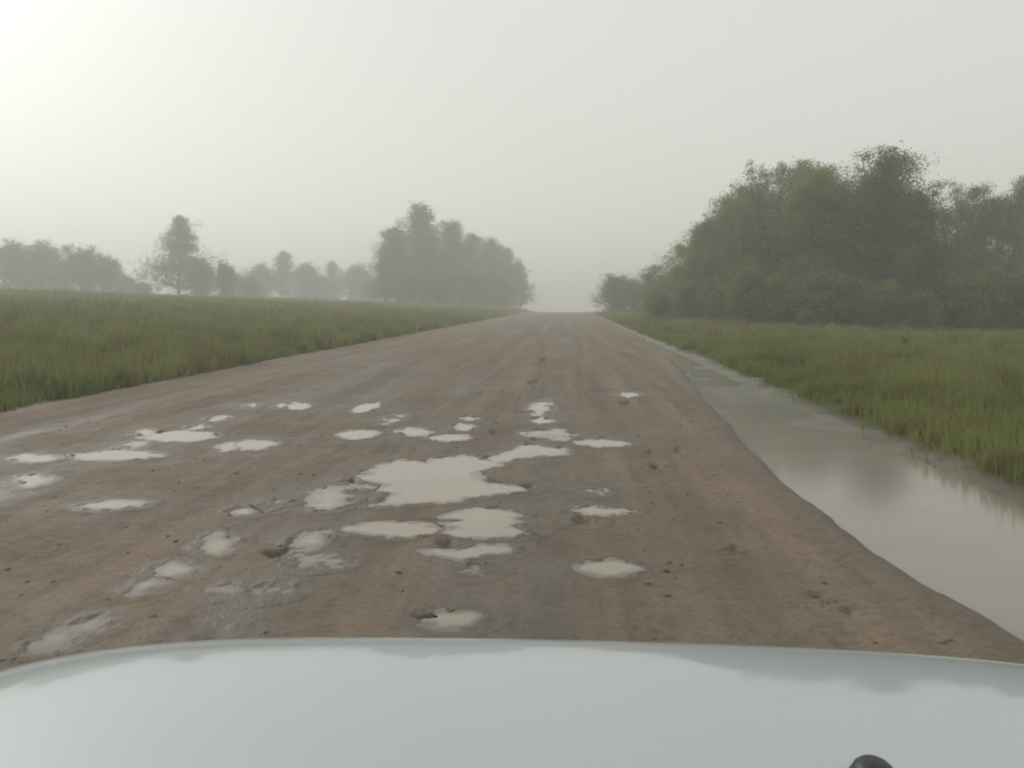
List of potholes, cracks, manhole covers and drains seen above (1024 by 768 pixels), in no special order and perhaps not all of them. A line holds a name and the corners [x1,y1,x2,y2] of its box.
pothole [39,607,141,640]
pothole [126,427,164,437]
pothole [397,600,517,638]
pothole [54,497,168,515]
pothole [0,471,67,490]
pothole [64,448,177,464]
pothole [333,517,443,543]
pothole [399,541,539,565]
pothole [119,554,223,583]
pothole [169,528,259,560]
pothole [345,453,545,511]
pothole [481,442,582,464]
